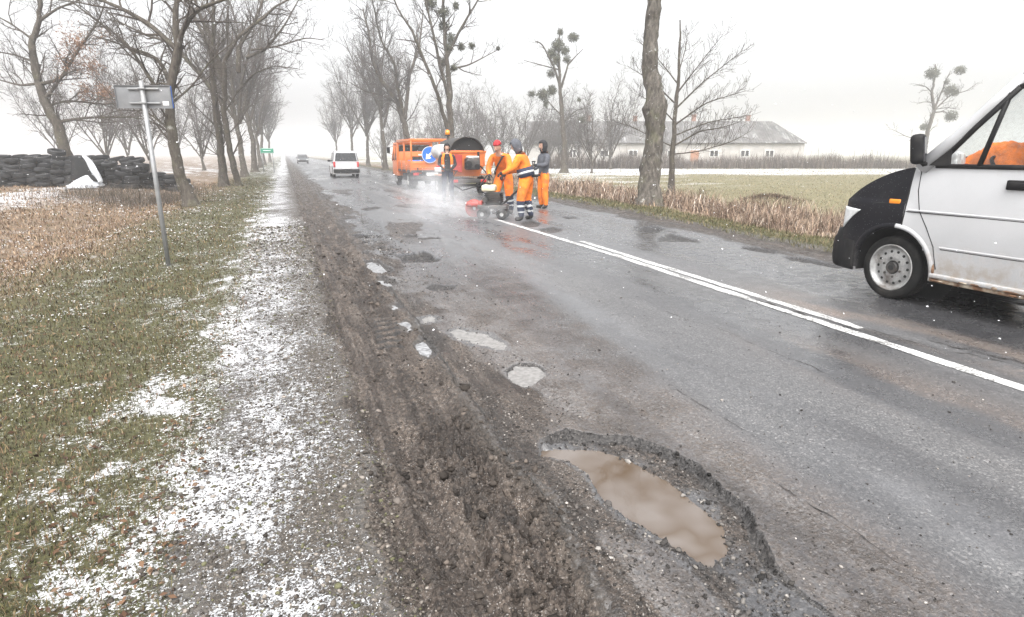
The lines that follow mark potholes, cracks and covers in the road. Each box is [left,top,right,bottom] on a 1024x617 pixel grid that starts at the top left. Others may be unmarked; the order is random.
crack [776,482,900,564]
pothole [533,427,839,617]
pothole [423,282,458,291]
pothole [392,250,444,263]
